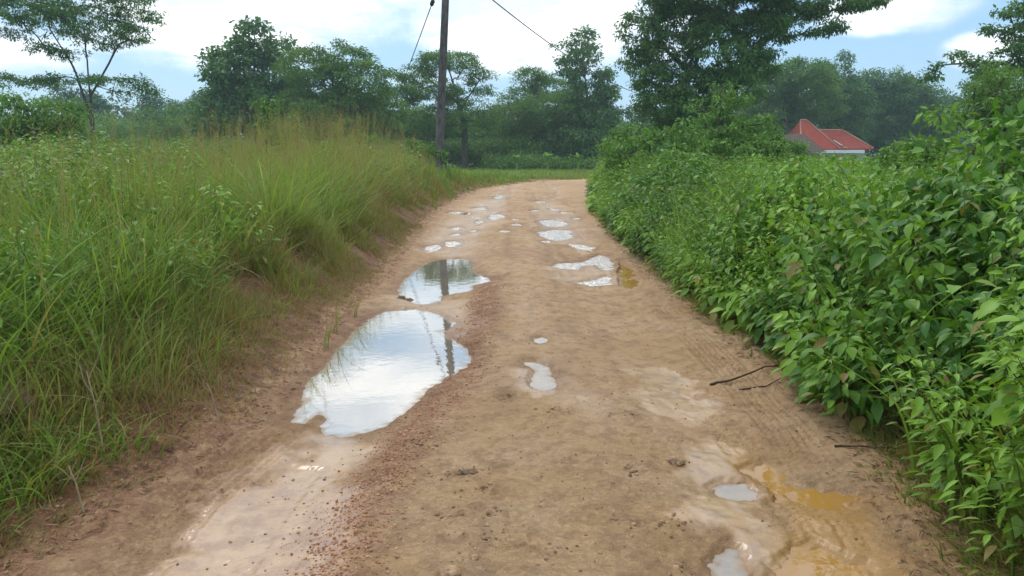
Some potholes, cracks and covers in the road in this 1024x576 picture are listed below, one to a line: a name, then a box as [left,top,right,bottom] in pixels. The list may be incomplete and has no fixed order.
pothole [731,453,881,515]
pothole [694,472,776,505]
pothole [754,529,900,576]
pothole [392,256,499,306]
pothole [533,228,578,241]
pothole [542,253,620,271]
pothole [277,305,482,441]
pothole [689,534,759,576]
pothole [515,356,568,393]
